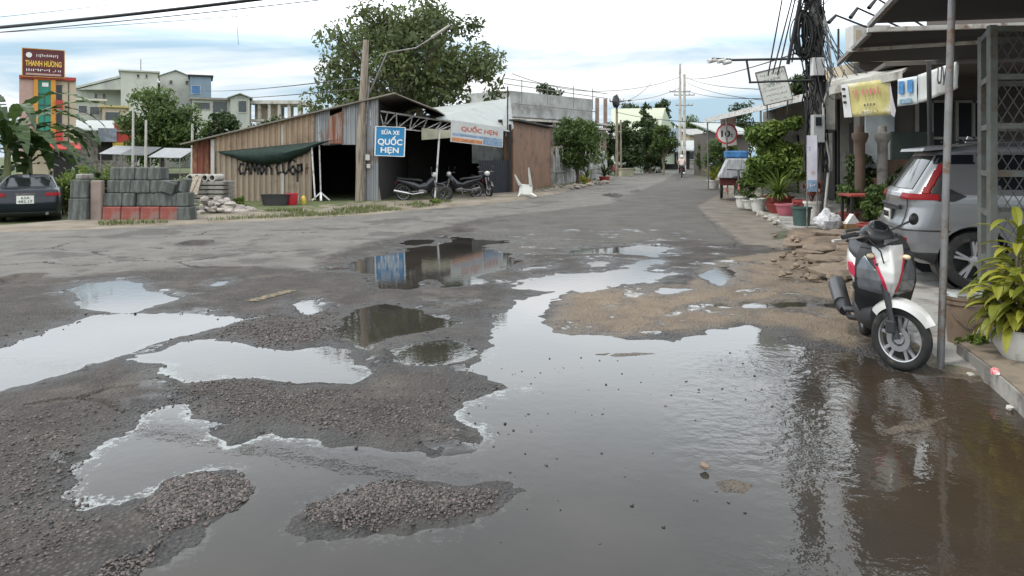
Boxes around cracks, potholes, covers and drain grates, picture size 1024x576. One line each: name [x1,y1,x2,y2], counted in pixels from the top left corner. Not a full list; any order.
pothole [22,292,1024,576]
pothole [650,285,697,294]
pothole [327,235,537,290]
pothole [56,278,184,314]
pothole [694,264,740,287]
